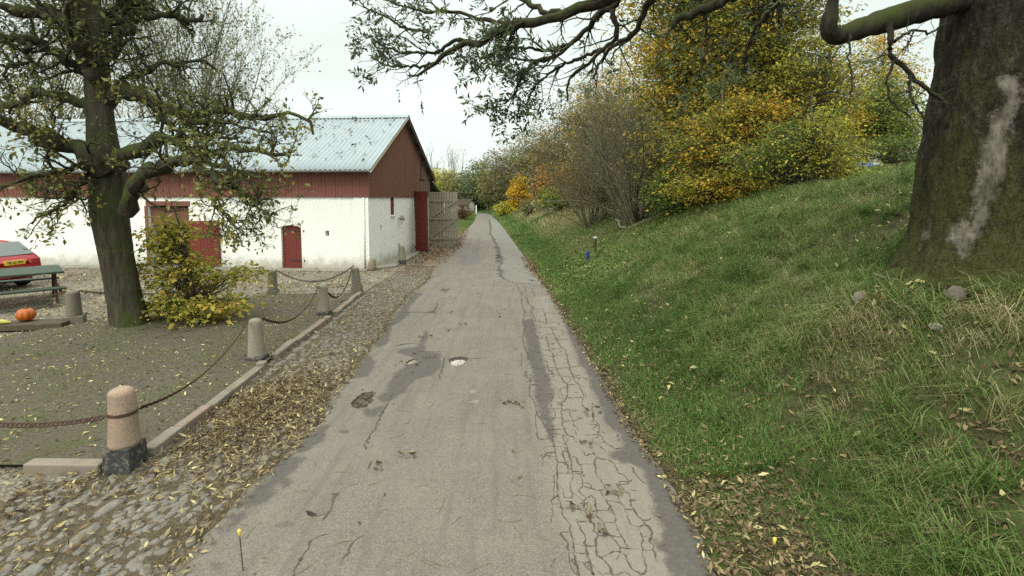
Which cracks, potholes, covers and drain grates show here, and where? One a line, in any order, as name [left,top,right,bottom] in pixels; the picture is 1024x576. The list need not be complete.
crack [517,286,656,576]
crack [291,492,363,576]
pothole [351,391,376,408]
pothole [449,357,468,366]
crack [489,220,536,284]
crack [363,394,393,469]
